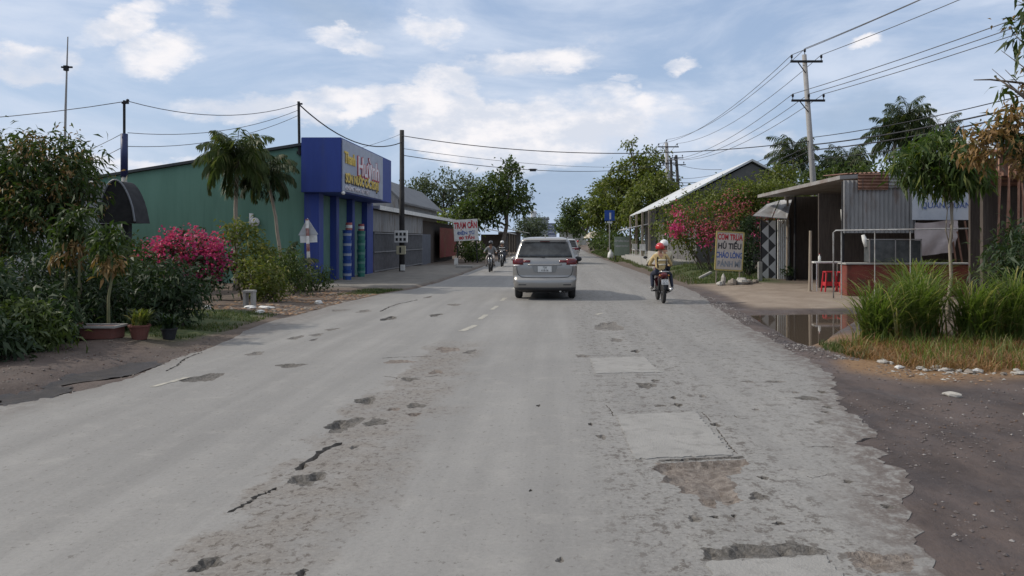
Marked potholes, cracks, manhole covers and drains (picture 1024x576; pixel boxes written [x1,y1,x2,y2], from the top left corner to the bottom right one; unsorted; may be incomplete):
pothole [287,471,328,486]
pothole [354,397,376,405]
pothole [180,373,225,382]
pothole [187,556,225,573]
pothole [323,417,365,433]
crack [227,487,277,513]
pothole [652,459,751,509]
pothole [594,322,624,331]
pothole [700,540,827,561]
